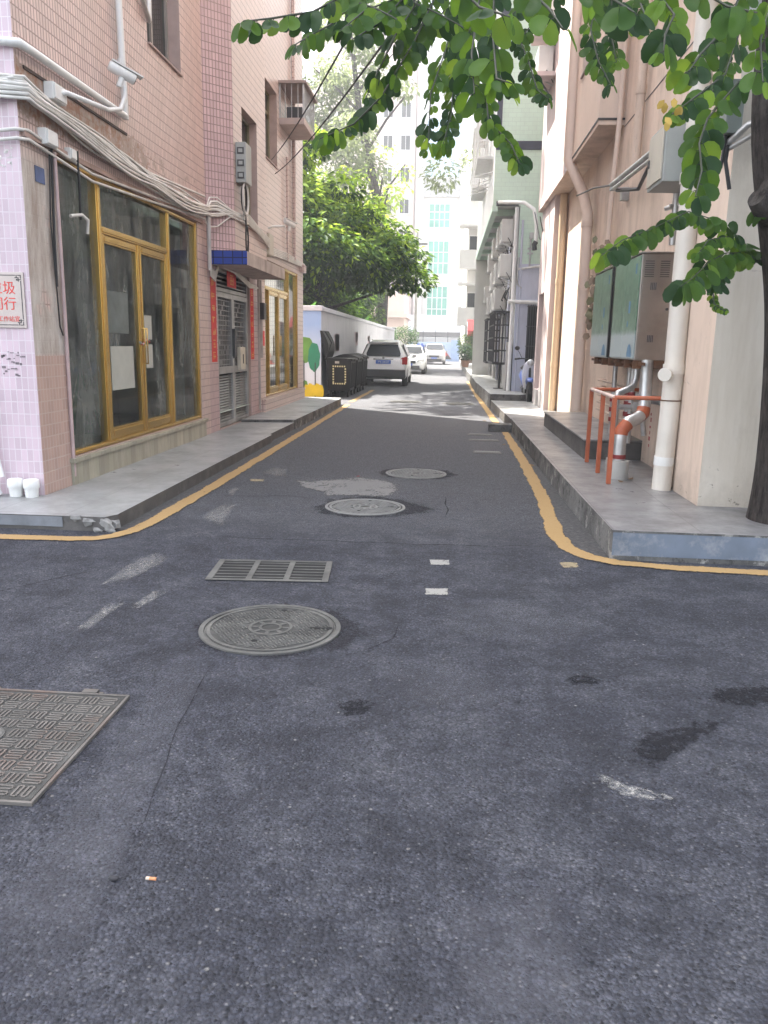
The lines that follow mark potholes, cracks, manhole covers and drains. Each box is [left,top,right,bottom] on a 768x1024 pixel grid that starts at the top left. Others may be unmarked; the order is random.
crack [121,664,213,866]
drain grate [205,559,333,582]
manhole cover [0,687,130,807]
manhole cover [325,499,405,516]
manhole cover [386,468,446,479]
manhole cover [198,604,341,656]
